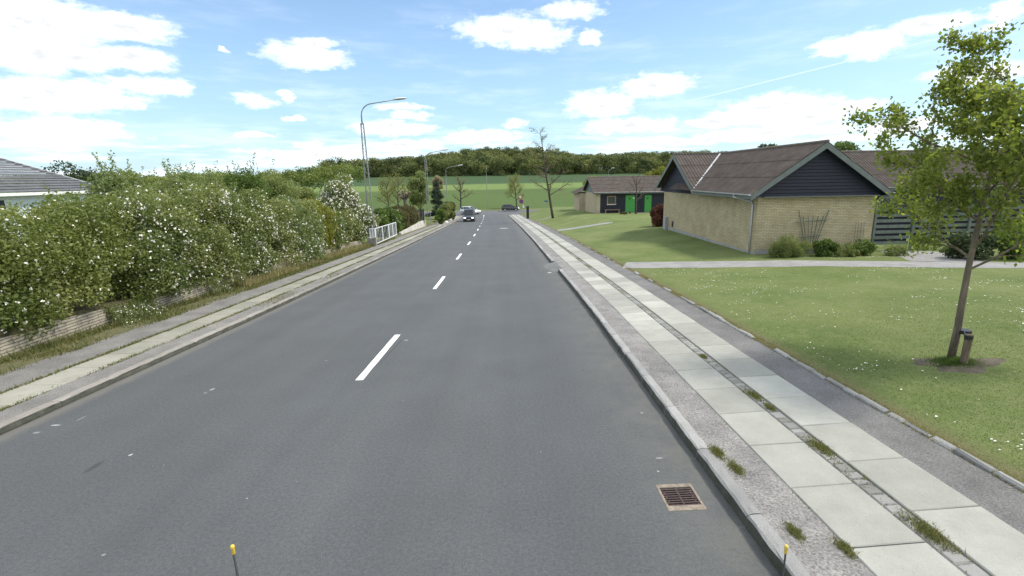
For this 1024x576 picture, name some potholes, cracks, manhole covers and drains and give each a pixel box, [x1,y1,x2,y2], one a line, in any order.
drain grate [656,483,707,511]
